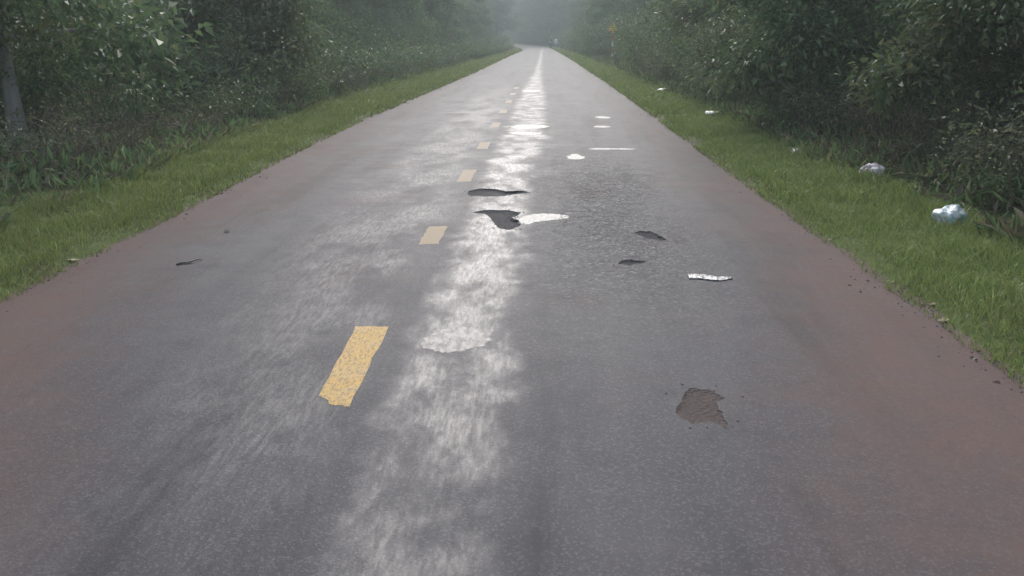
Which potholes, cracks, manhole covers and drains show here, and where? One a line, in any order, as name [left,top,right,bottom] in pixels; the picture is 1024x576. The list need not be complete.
pothole [665,383,744,429]
pothole [612,258,651,266]
pothole [472,209,524,230]
pothole [635,231,666,241]
pothole [467,188,530,197]
